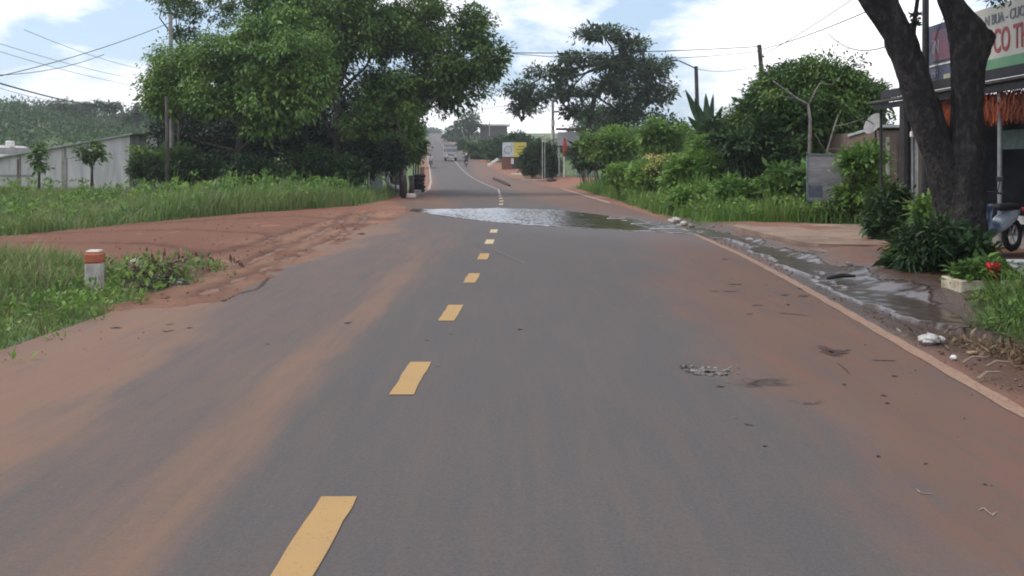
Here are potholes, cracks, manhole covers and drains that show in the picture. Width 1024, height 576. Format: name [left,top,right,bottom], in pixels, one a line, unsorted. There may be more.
crack [220,274,272,297]
pothole [680,365,739,377]
